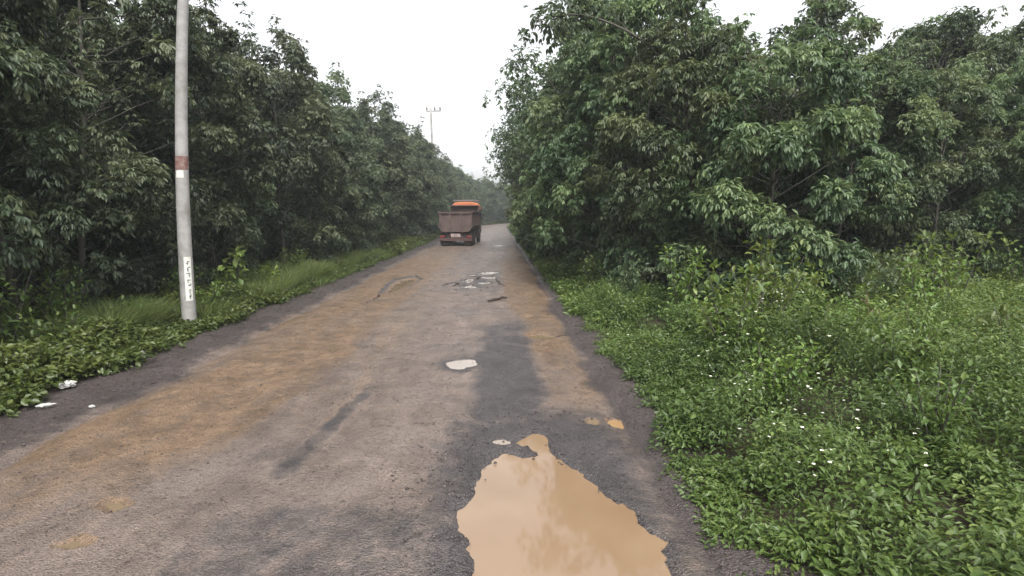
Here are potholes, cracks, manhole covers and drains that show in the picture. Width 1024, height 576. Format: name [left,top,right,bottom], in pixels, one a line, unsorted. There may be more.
pothole [377,275,423,294]
pothole [94,495,138,513]
pothole [445,430,687,576]
pothole [49,532,99,550]
pothole [444,359,479,370]
pothole [603,417,625,429]
